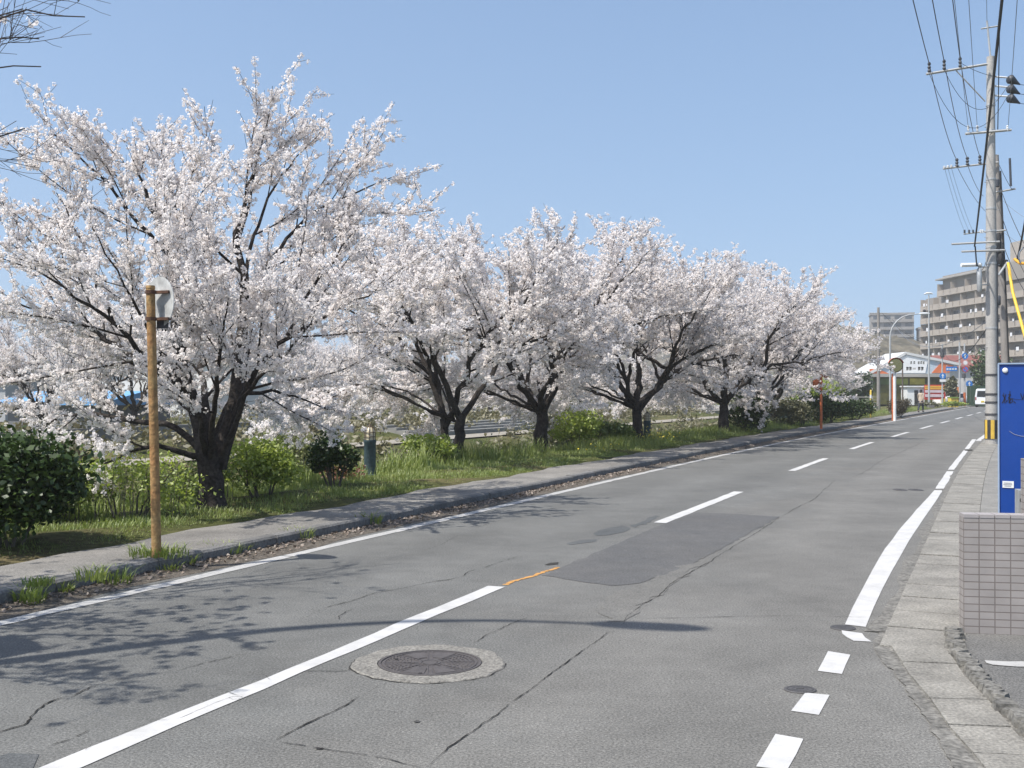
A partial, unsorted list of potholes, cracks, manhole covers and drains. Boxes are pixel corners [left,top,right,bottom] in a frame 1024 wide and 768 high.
crack [274,687,464,767]
utility cover [784,685,817,693]
manhole cover [349,644,506,684]
crack [0,678,120,732]
